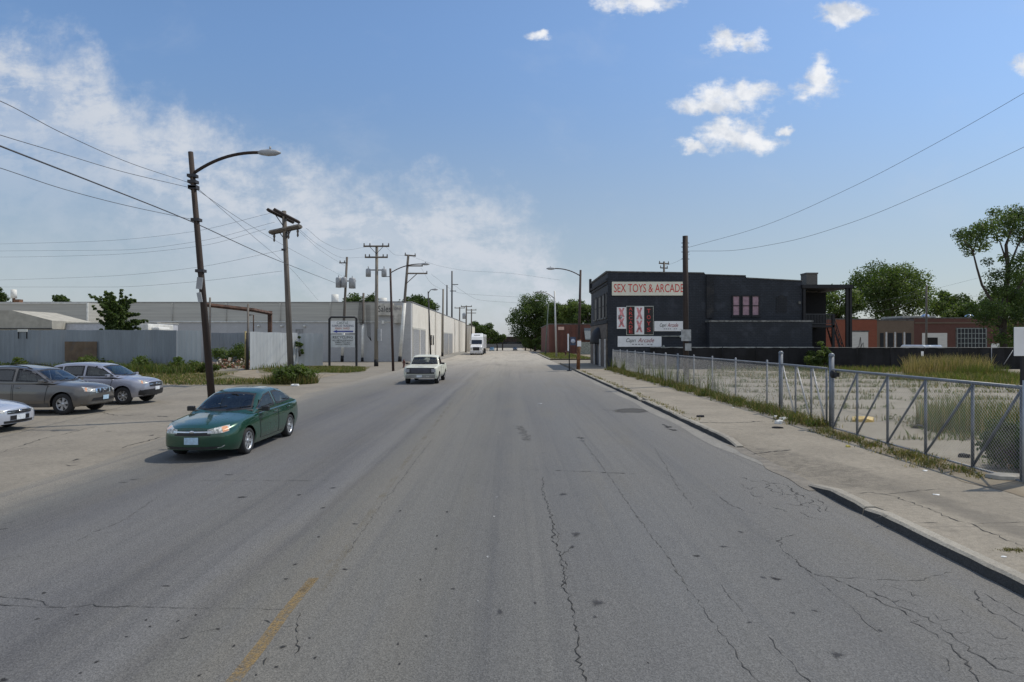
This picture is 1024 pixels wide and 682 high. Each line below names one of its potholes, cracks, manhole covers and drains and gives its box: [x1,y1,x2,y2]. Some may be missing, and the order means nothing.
crack [776,534,1022,681]
crack [719,477,827,520]
crack [501,468,587,681]
crack [0,596,138,607]
